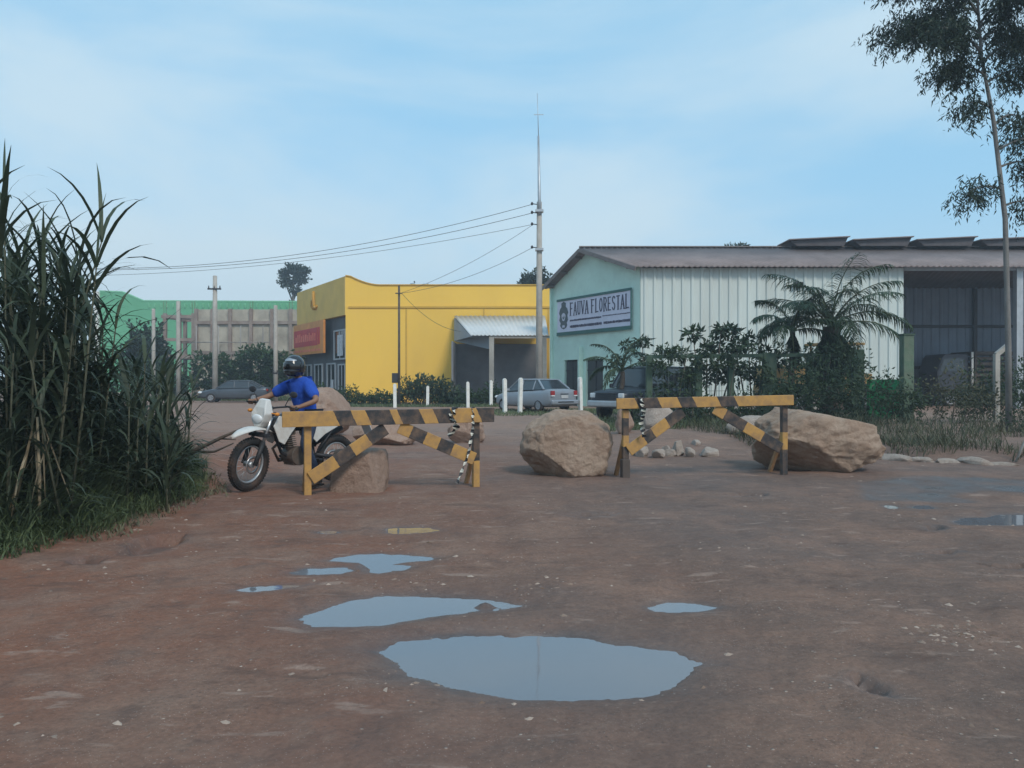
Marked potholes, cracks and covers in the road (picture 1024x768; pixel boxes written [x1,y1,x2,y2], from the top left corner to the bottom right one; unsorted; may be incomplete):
pothole [332,616,757,721]
pothole [940,512,1024,526]
pothole [271,586,545,632]
pothole [834,670,904,700]
pothole [313,550,445,575]
